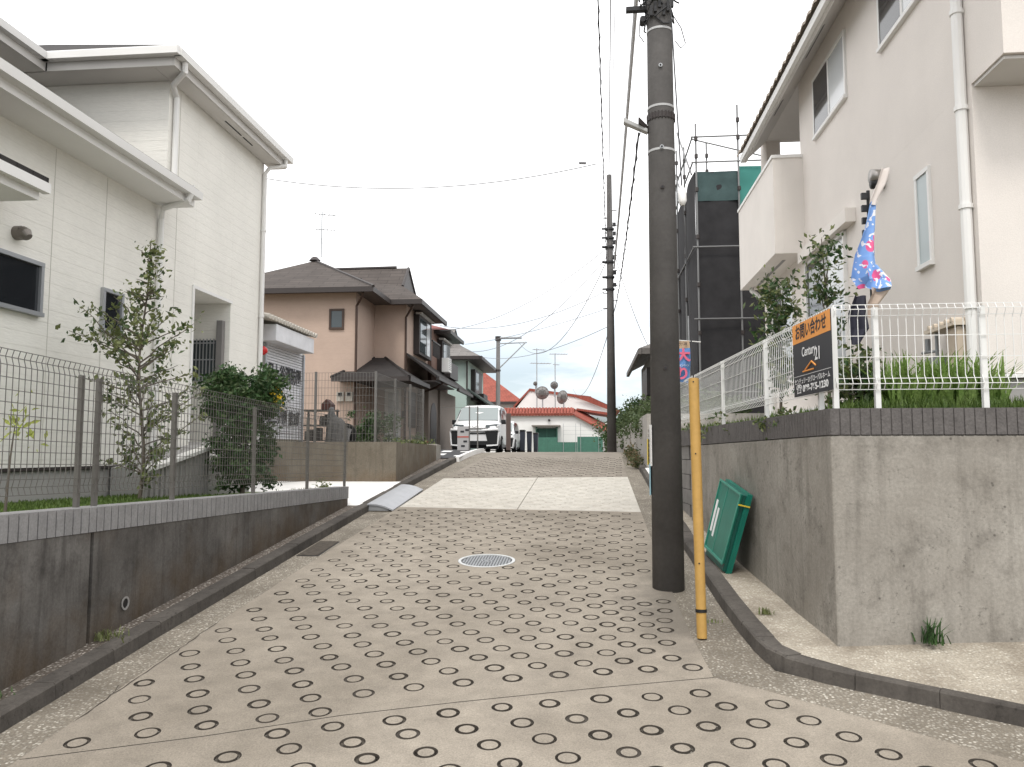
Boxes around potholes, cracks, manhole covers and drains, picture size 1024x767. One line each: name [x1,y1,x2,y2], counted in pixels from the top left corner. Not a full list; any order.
drain grate [297,541,340,556]
manhole cover [458,554,515,567]
